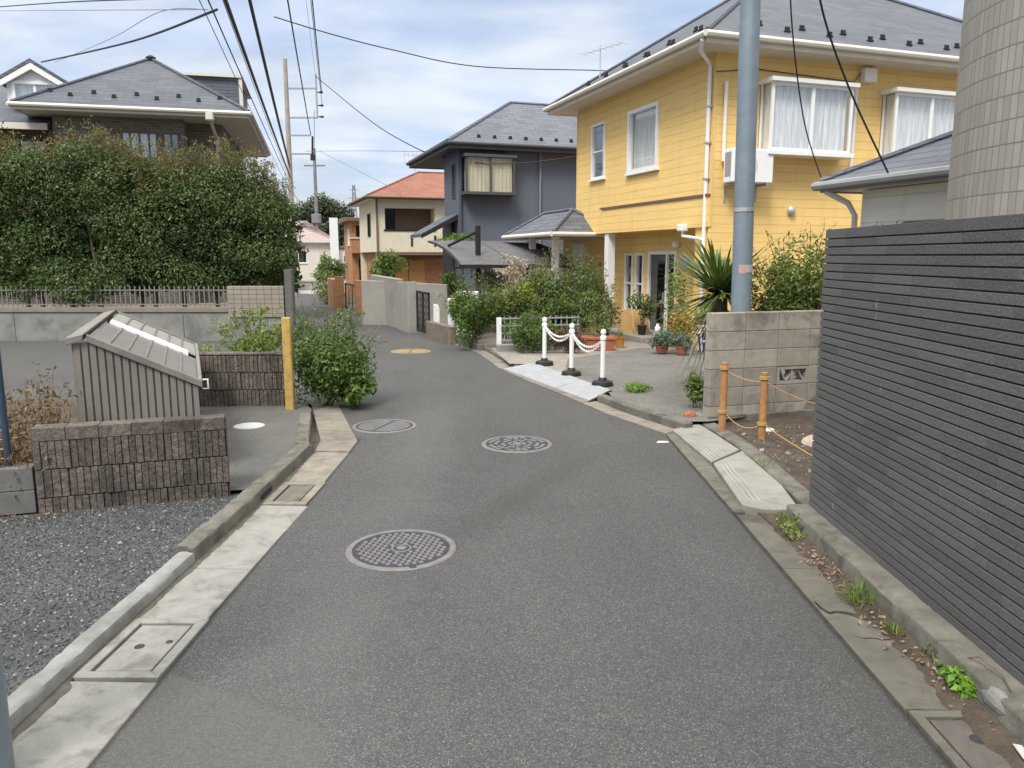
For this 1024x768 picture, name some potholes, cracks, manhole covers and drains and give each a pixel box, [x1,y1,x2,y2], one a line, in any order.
manhole cover [352,419,417,433]
manhole cover [233,422,265,430]
crack [815,602,857,618]
manhole cover [482,436,552,453]
manhole cover [345,529,457,571]
